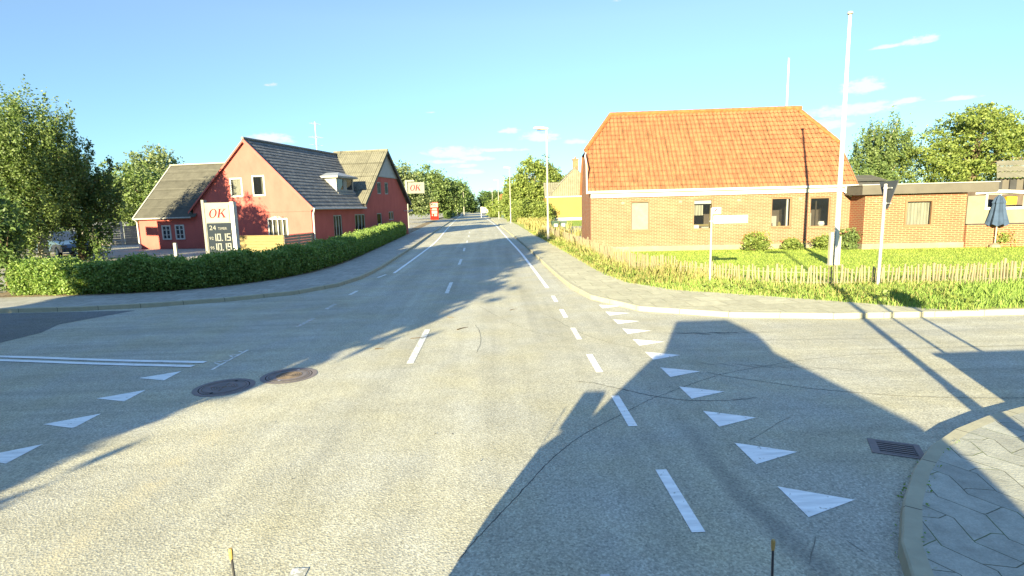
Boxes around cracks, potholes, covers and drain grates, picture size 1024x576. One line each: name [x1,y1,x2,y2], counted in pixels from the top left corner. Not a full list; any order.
manhole cover [191,378,256,397]
drain grate [867,438,924,459]
manhole cover [260,368,318,384]
